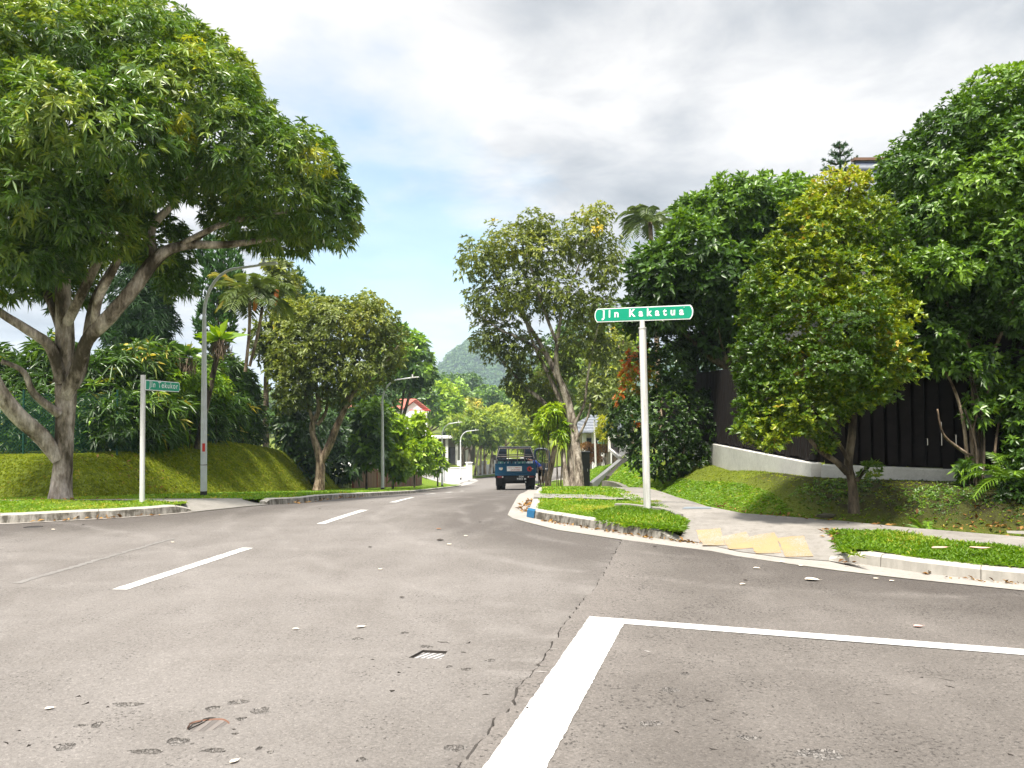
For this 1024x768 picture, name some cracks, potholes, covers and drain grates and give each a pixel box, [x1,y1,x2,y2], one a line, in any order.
pothole [794,749,845,761]
pothole [166,737,190,746]
pothole [53,743,76,751]
